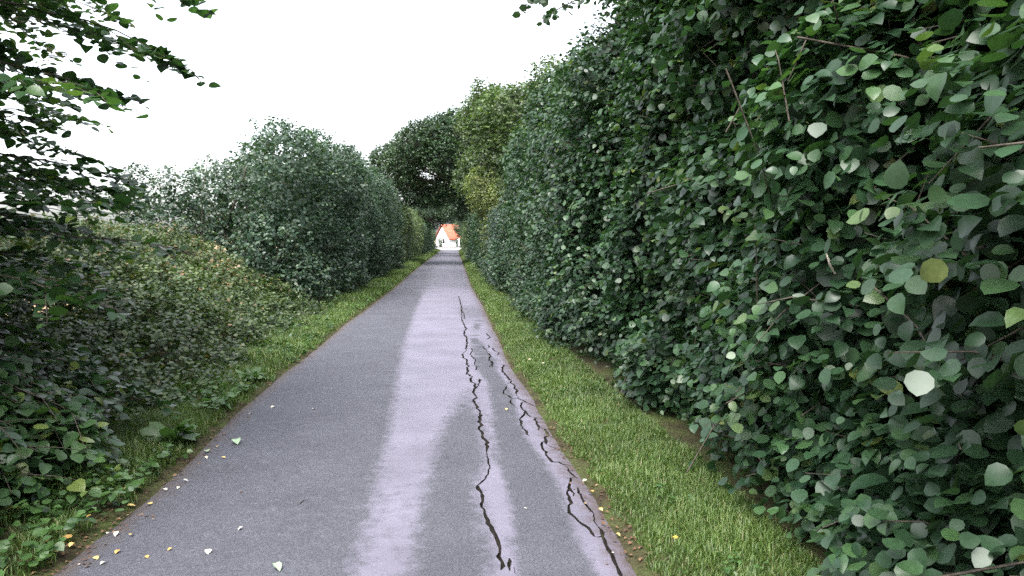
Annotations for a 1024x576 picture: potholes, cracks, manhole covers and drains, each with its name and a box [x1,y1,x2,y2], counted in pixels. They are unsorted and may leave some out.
crack [458,296,627,576]
